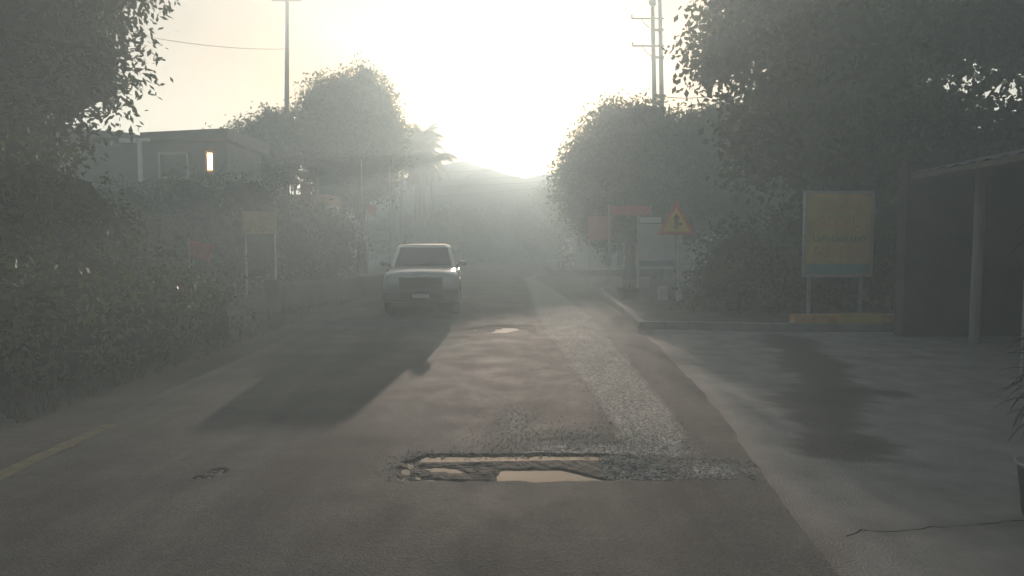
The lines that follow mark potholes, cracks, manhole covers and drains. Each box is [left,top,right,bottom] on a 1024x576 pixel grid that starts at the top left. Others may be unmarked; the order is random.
crack [847,520,1024,536]
pothole [460,324,538,334]
pothole [394,452,683,482]
pothole [189,466,230,480]
